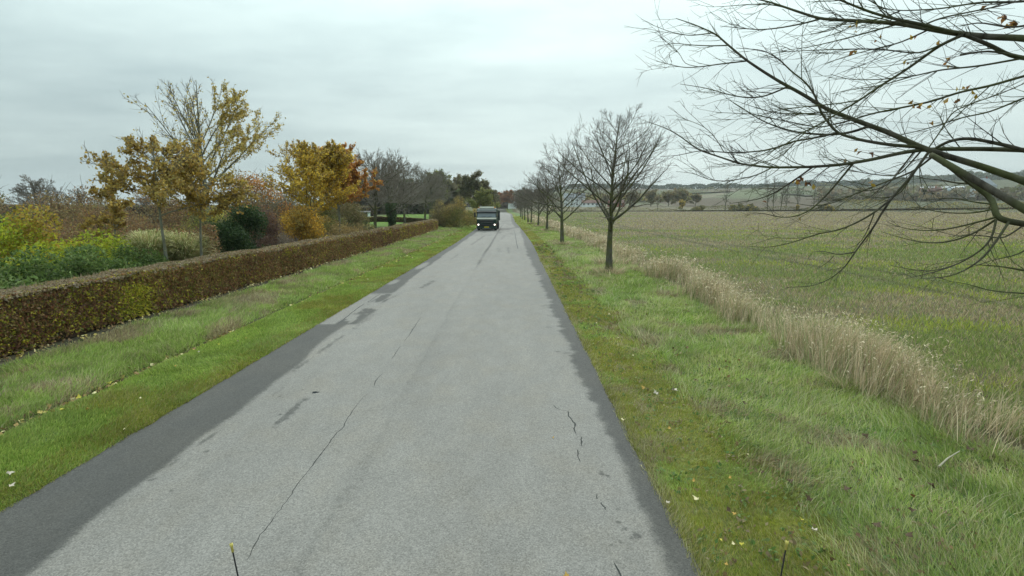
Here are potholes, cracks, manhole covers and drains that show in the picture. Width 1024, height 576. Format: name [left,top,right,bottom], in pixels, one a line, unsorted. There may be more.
crack [248,319,420,558]
crack [555,407,583,461]
